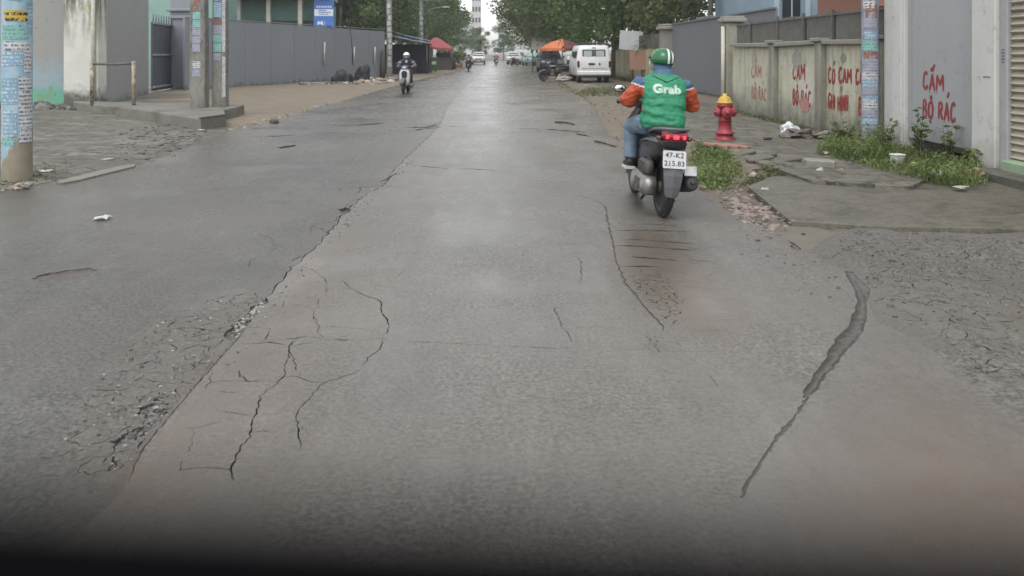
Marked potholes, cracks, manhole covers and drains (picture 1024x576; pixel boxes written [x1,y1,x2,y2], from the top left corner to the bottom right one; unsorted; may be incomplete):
crack [833,231,1024,374]
crack [44,178,710,480]
